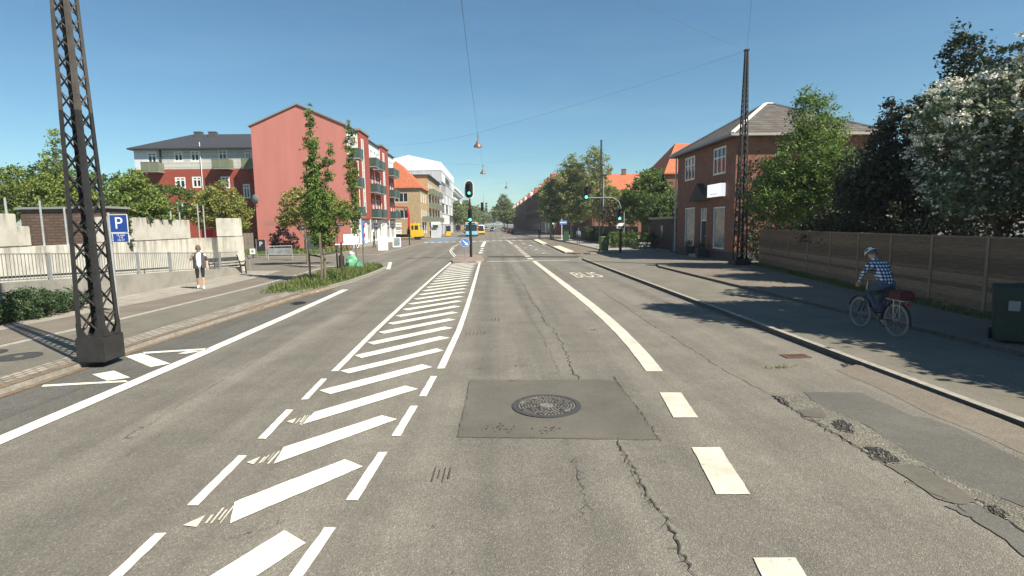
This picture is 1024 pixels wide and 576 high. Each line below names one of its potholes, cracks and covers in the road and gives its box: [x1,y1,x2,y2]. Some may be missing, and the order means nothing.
pothole [987,505,1011,519]
pothole [864,446,901,465]
pothole [831,419,856,433]
crack [513,271,580,379]
manhole cover [512,394,581,418]
crack [611,437,697,576]
